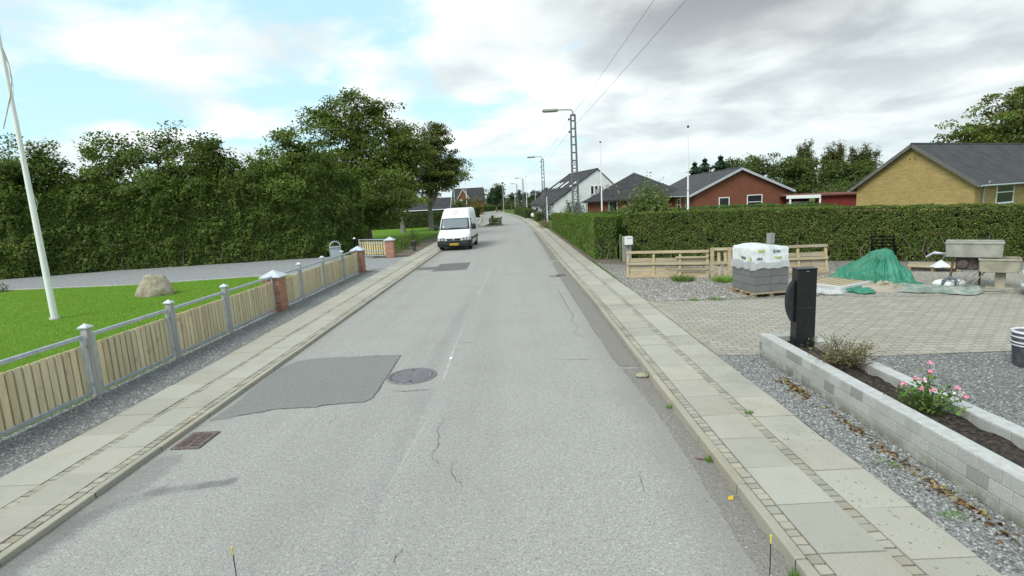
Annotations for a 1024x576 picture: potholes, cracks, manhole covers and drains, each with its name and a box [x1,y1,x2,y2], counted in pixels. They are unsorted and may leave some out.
drain grate [170,431,220,450]
manhole cover [386,368,438,385]
